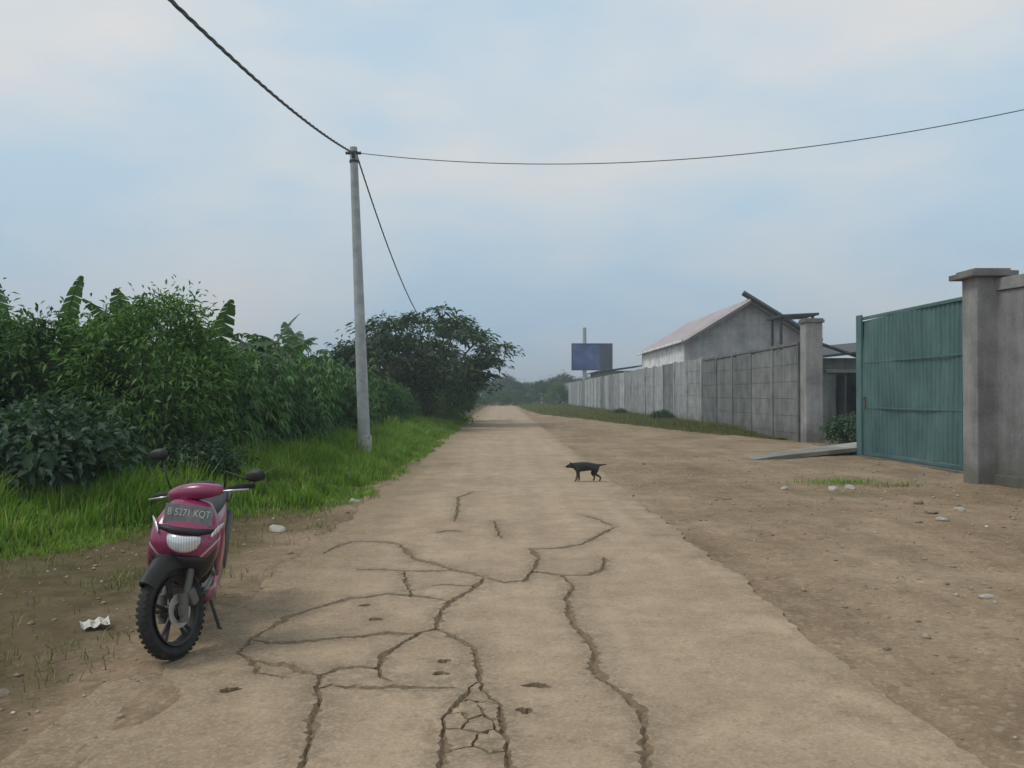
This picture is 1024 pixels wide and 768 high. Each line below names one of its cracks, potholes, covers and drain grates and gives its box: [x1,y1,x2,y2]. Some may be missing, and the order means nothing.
crack [235,492,655,768]
